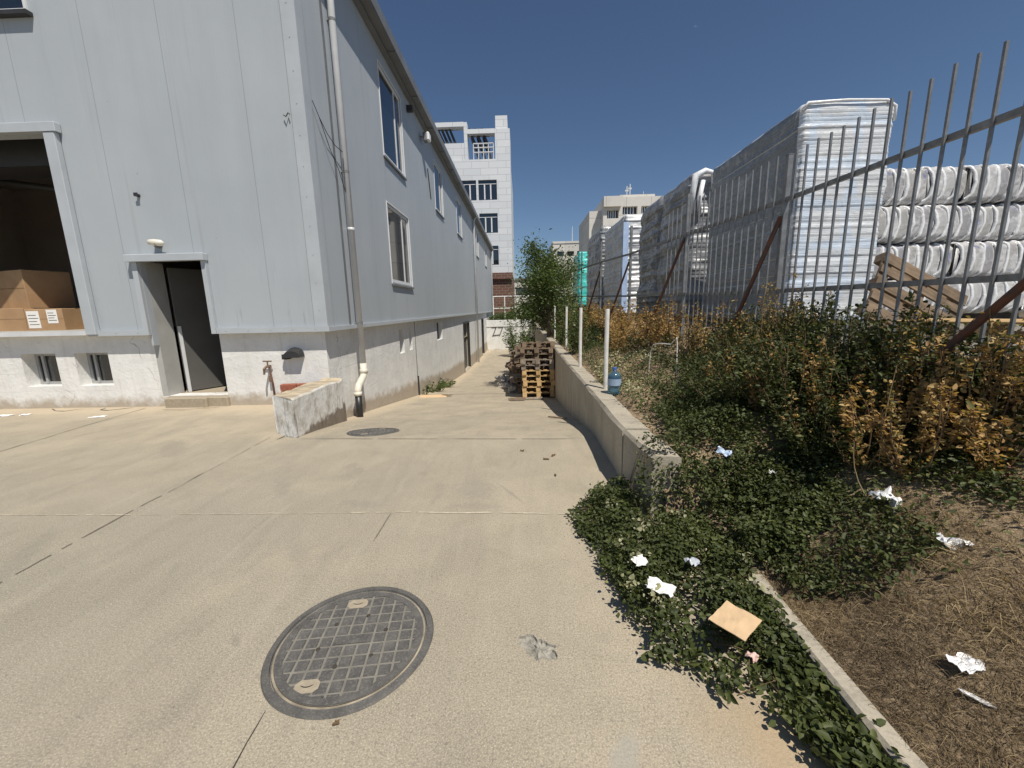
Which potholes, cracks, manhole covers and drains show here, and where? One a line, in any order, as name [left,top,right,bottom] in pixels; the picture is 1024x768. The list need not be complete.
manhole cover [260,586,434,720]
manhole cover [347,428,399,436]
